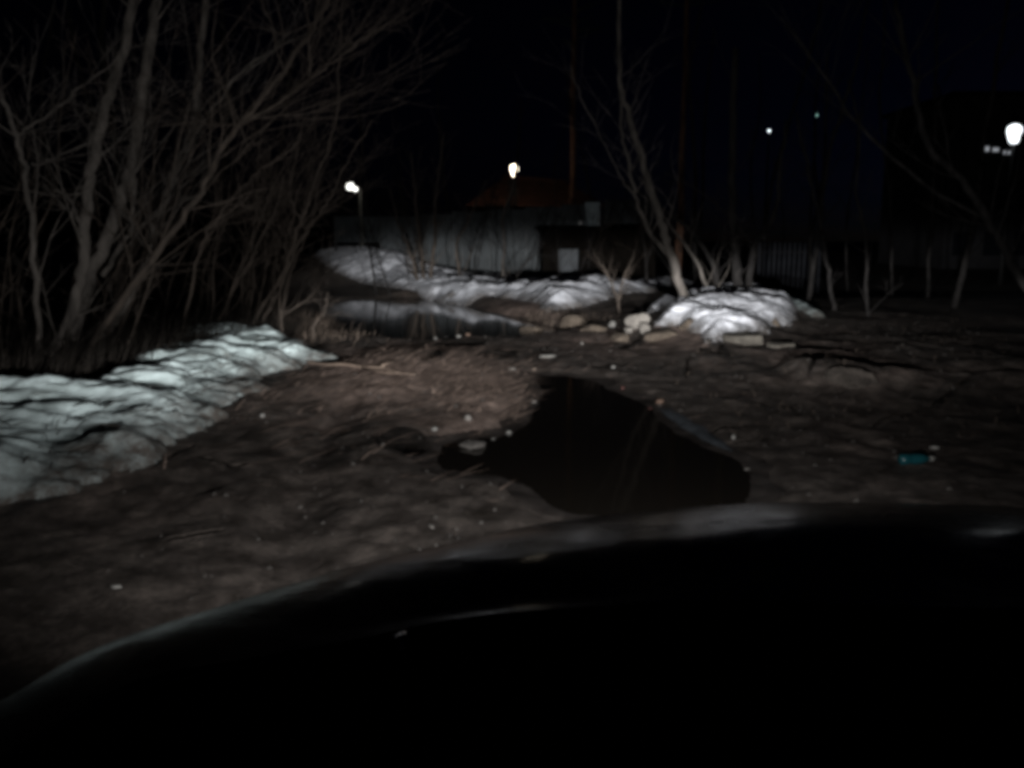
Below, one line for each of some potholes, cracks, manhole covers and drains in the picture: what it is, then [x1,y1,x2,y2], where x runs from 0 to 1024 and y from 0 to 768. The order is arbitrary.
crack [793,357,986,428]
pothole [401,371,786,521]
